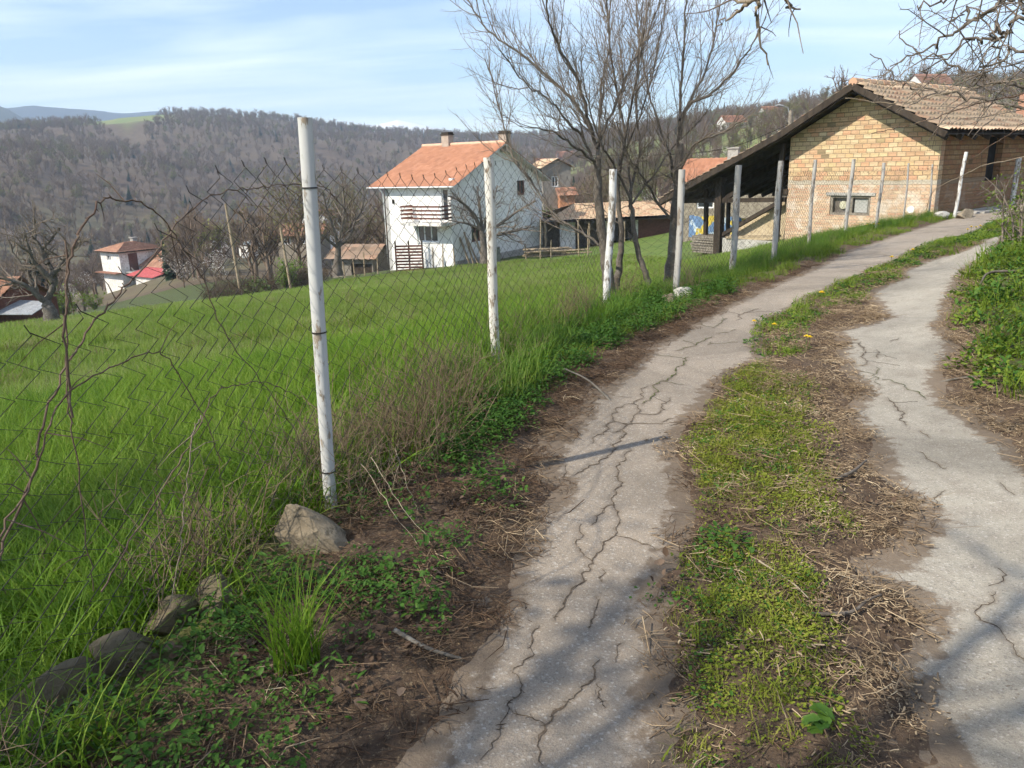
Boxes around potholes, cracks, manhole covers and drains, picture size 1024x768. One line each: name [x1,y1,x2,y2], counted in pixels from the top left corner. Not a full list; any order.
crack [850,339,946,469]
crack [480,310,775,765]
crack [974,568,1024,659]
